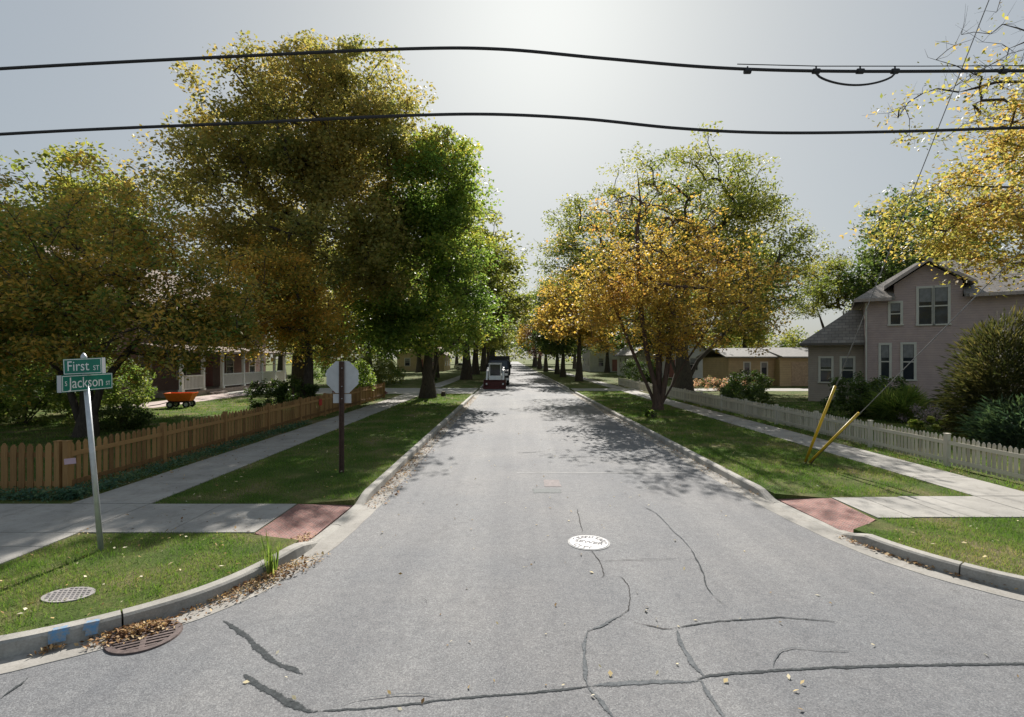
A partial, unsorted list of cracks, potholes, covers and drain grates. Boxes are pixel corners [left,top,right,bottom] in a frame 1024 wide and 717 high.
utility cover [41,587,96,603]
drain grate [103,619,183,656]
crack [622,579,671,629]
manhole cover [568,535,610,551]
